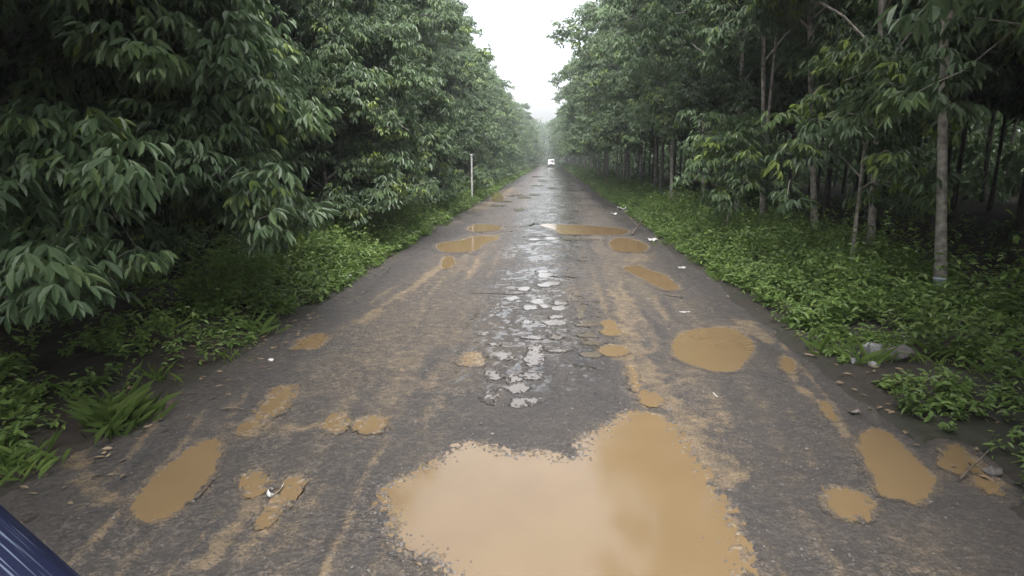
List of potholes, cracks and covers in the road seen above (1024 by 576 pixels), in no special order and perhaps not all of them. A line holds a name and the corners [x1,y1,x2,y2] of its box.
pothole [665,325,761,374]
pothole [238,467,272,500]
pothole [967,473,1008,497]
pothole [367,406,766,576]
pothole [596,343,632,357]
pothole [537,223,633,236]
pothole [815,483,881,525]
pothole [253,473,309,531]
pothole [120,435,227,527]
